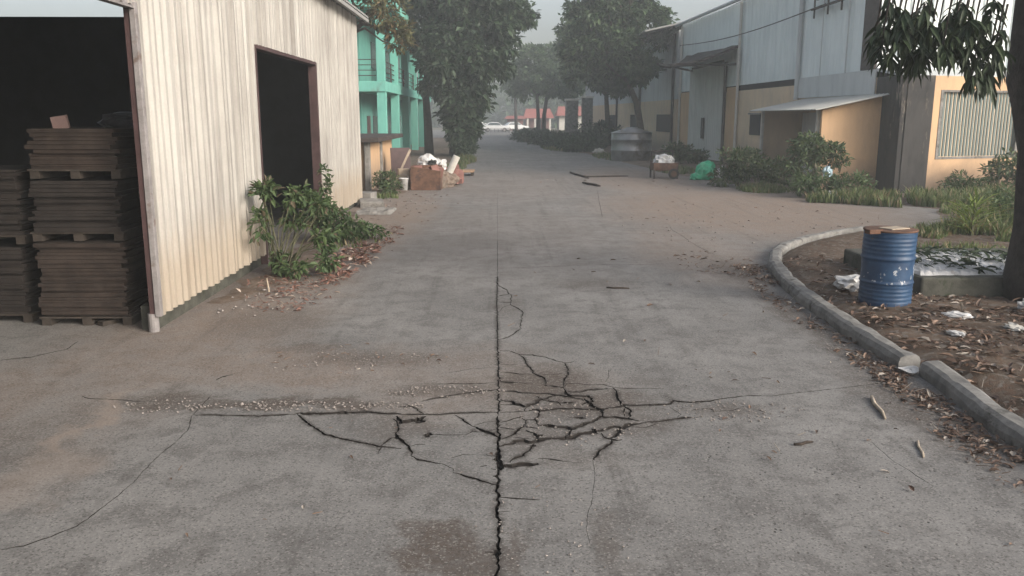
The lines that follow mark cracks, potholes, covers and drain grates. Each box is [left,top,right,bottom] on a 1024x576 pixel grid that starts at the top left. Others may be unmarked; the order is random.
crack [696,382,887,411]
crack [1,398,209,550]
crack [297,191,709,576]
